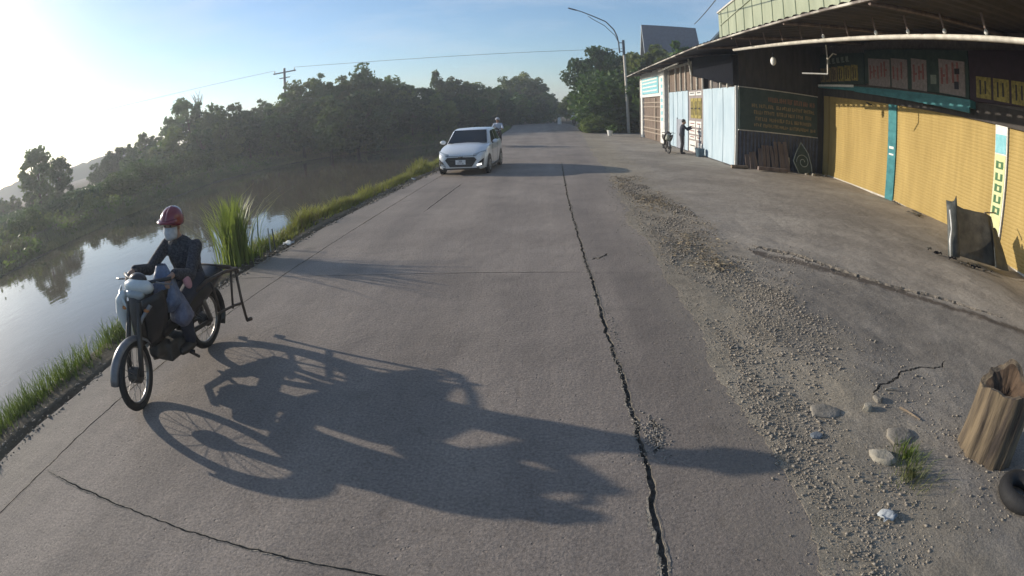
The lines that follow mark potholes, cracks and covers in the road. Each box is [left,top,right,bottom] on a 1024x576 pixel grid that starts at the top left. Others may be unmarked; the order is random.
crack [560,162,672,576]
crack [873,361,945,393]
